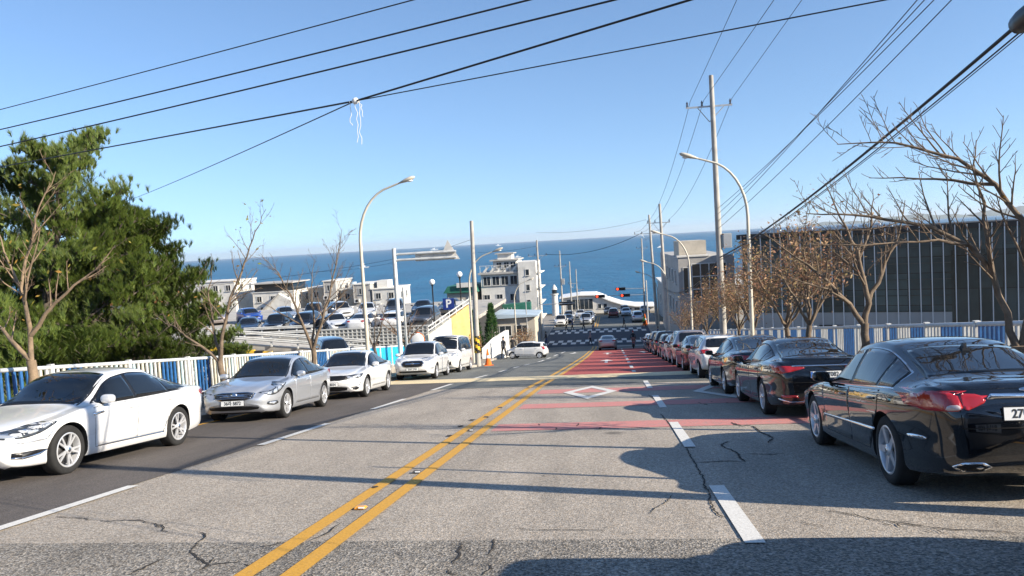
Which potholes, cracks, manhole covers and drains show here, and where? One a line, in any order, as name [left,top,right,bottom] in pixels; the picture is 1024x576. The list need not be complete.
crack [56,516,168,532]
crack [686,422,781,517]
crack [447,542,463,575]
